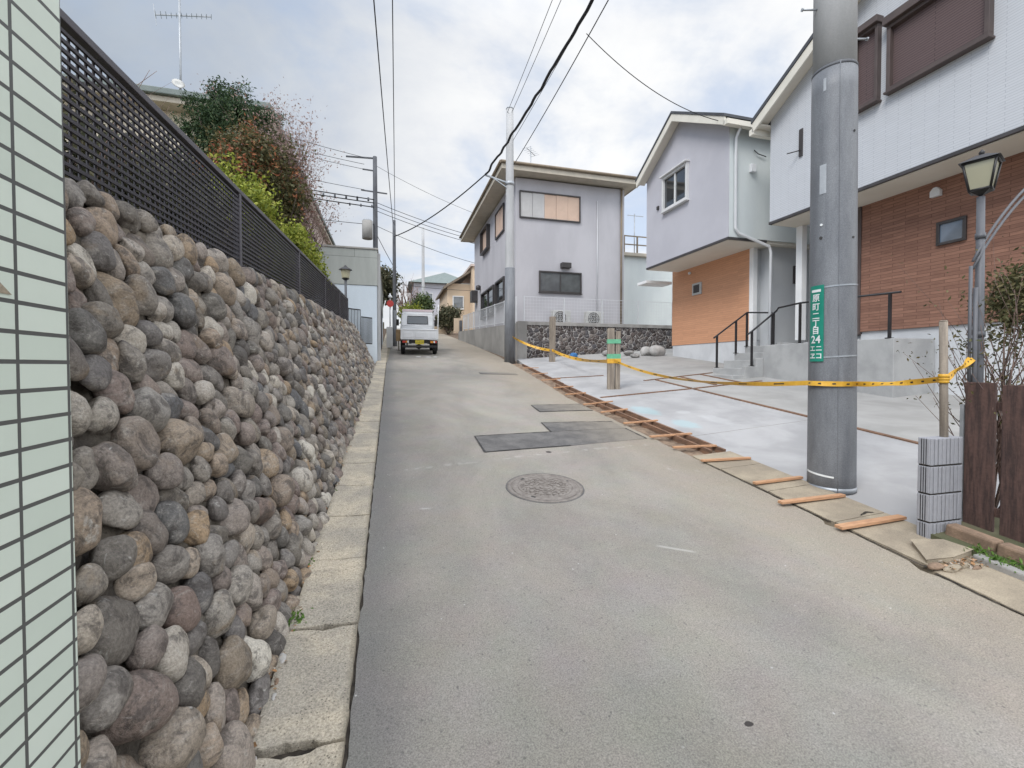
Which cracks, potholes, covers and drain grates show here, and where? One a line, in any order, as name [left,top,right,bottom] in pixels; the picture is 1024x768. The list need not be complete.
manhole cover [506,473,585,504]
